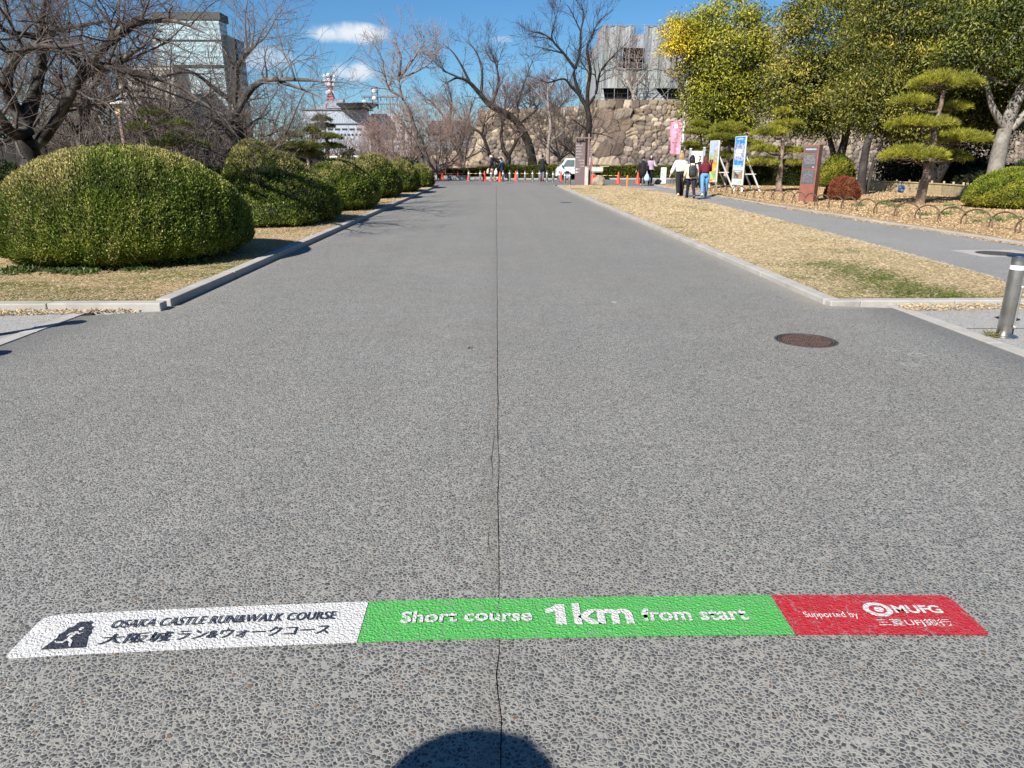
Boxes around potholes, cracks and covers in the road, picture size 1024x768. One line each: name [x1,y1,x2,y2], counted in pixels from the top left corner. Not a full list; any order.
manhole cover [774,333,838,348]
